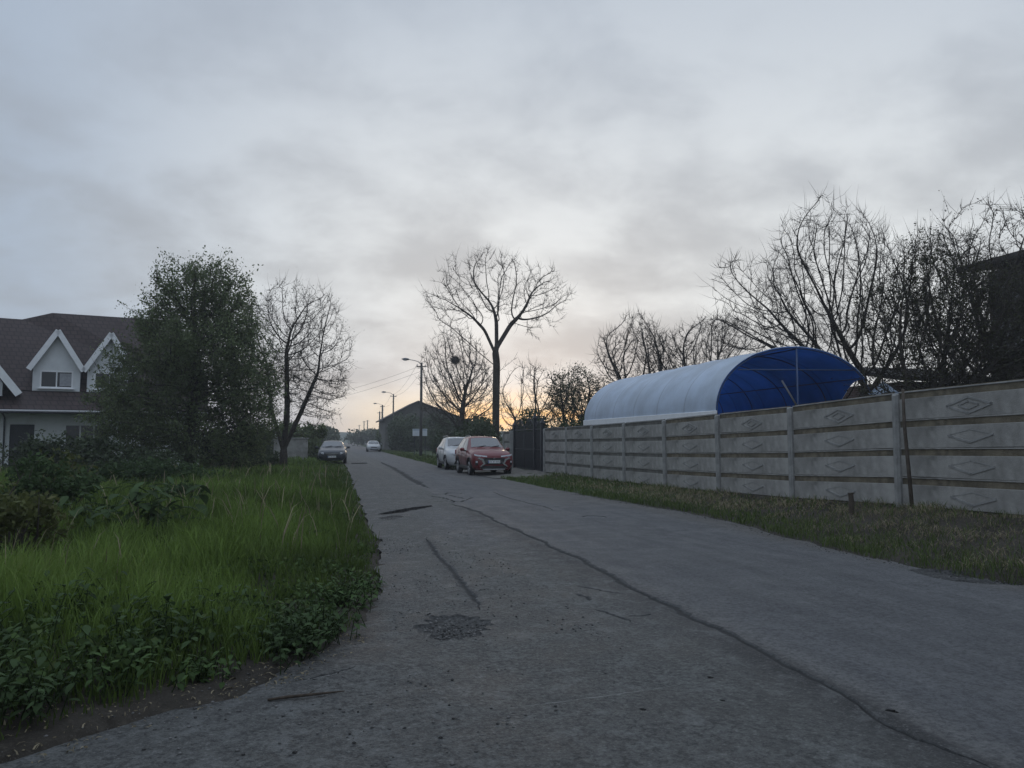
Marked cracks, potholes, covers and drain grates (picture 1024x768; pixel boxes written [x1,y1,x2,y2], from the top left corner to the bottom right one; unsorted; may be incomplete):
pothole [413,614,495,641]
